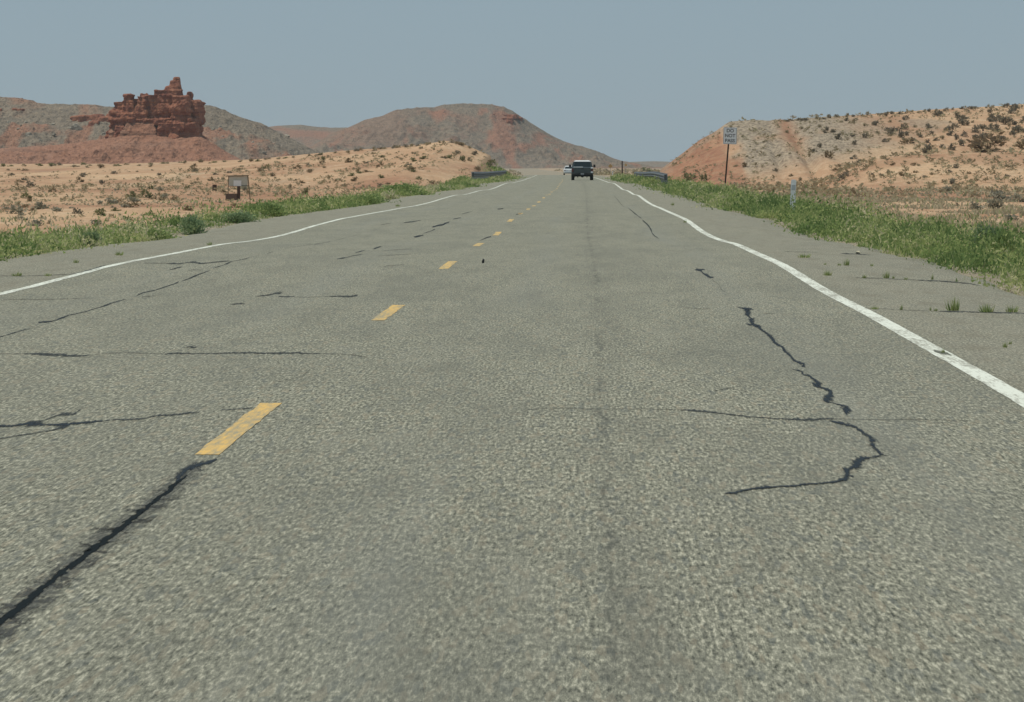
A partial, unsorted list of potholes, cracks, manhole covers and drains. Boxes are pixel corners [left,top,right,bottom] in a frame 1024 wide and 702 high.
crack [25,346,322,357]
crack [683,307,884,494]
crack [0,408,247,439]
crack [0,256,255,337]
